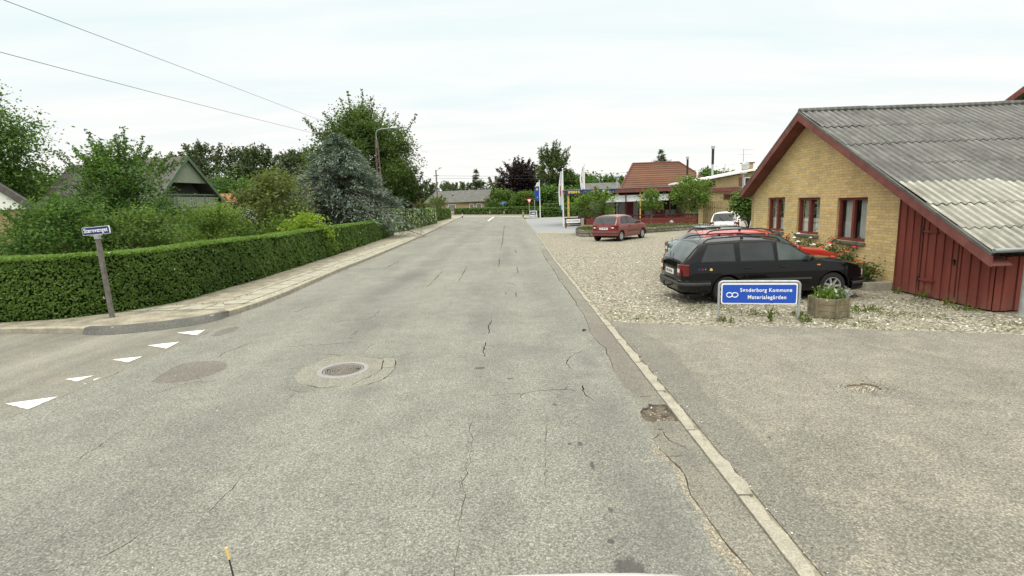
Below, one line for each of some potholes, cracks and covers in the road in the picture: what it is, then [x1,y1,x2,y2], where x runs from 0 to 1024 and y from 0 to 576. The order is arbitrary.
manhole cover [316,362,369,378]
crack [32,529,150,576]
pothole [847,383,881,392]
crack [653,429,755,576]
crack [500,385,593,400]
crack [454,410,480,576]
pothole [640,404,678,423]
